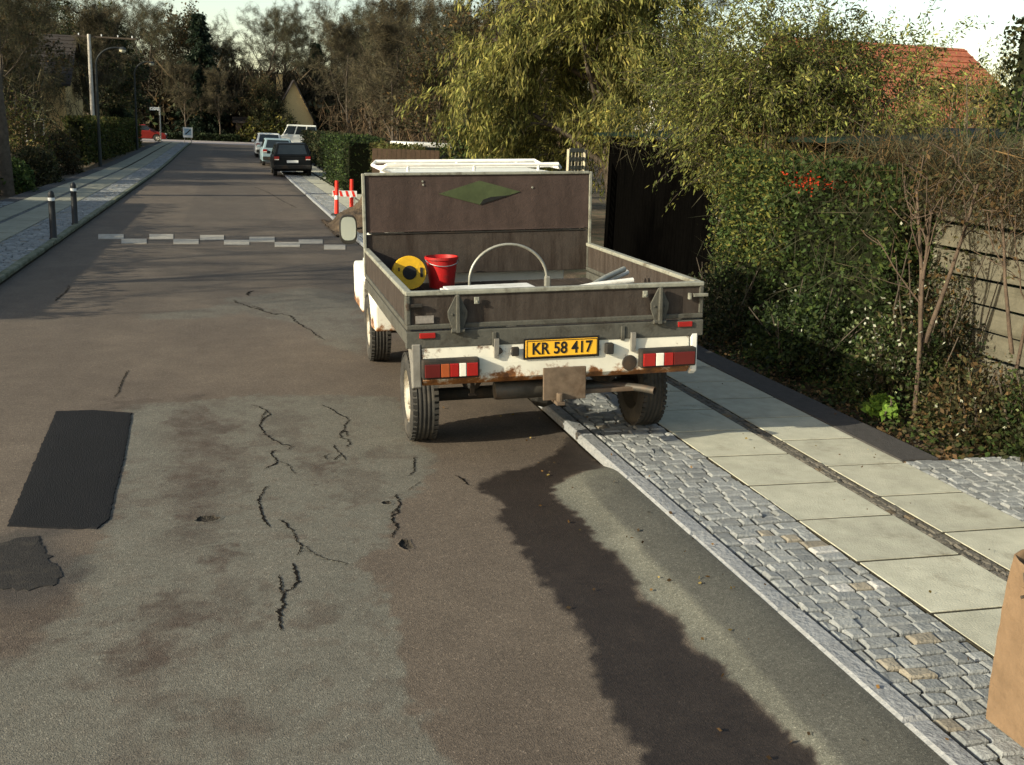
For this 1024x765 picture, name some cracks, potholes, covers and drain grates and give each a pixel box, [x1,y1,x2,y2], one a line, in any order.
crack [233,291,323,339]
pothole [396,537,416,551]
crack [253,405,296,473]
crack [323,405,353,460]
crack [257,486,348,630]
pothole [189,514,224,523]
crack [390,458,421,537]
